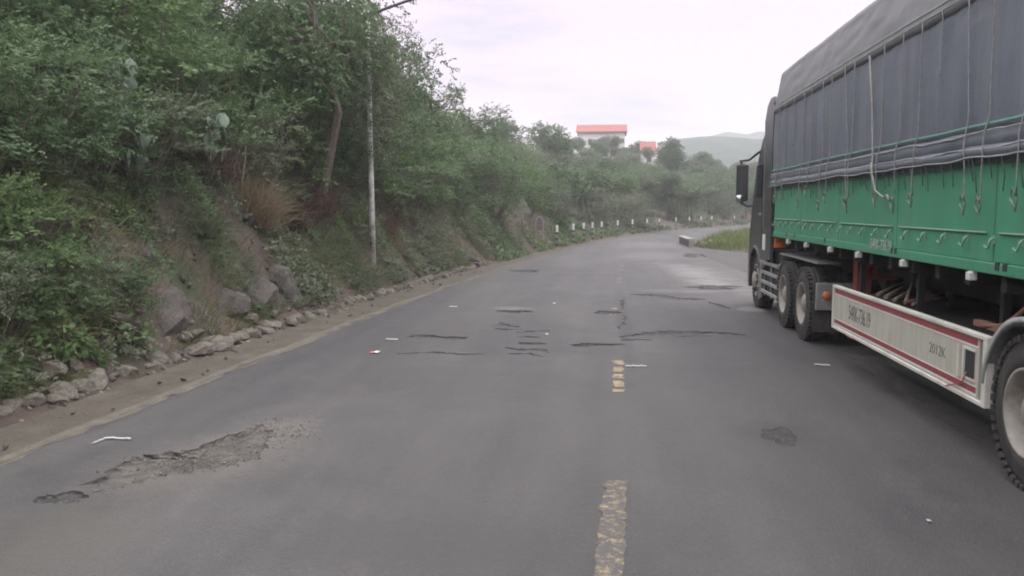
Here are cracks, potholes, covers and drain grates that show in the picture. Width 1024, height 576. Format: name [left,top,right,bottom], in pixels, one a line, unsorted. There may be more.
crack [617,294,742,341]
pothole [32,490,89,504]
pothole [761,427,797,447]
crack [495,322,550,357]
pothole [79,423,275,491]
